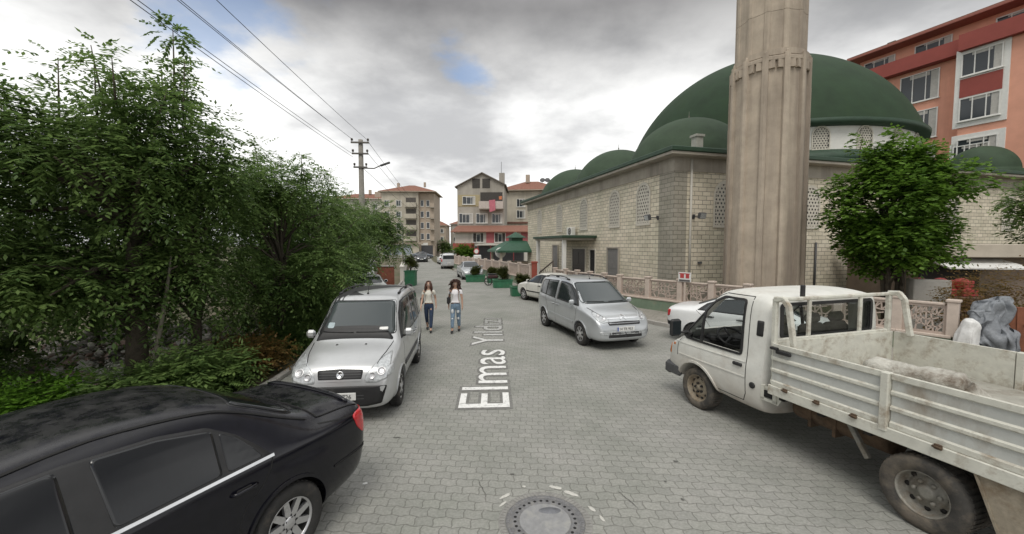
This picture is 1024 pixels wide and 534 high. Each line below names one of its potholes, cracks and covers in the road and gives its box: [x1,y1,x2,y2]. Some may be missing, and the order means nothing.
manhole cover [498,492,593,534]
